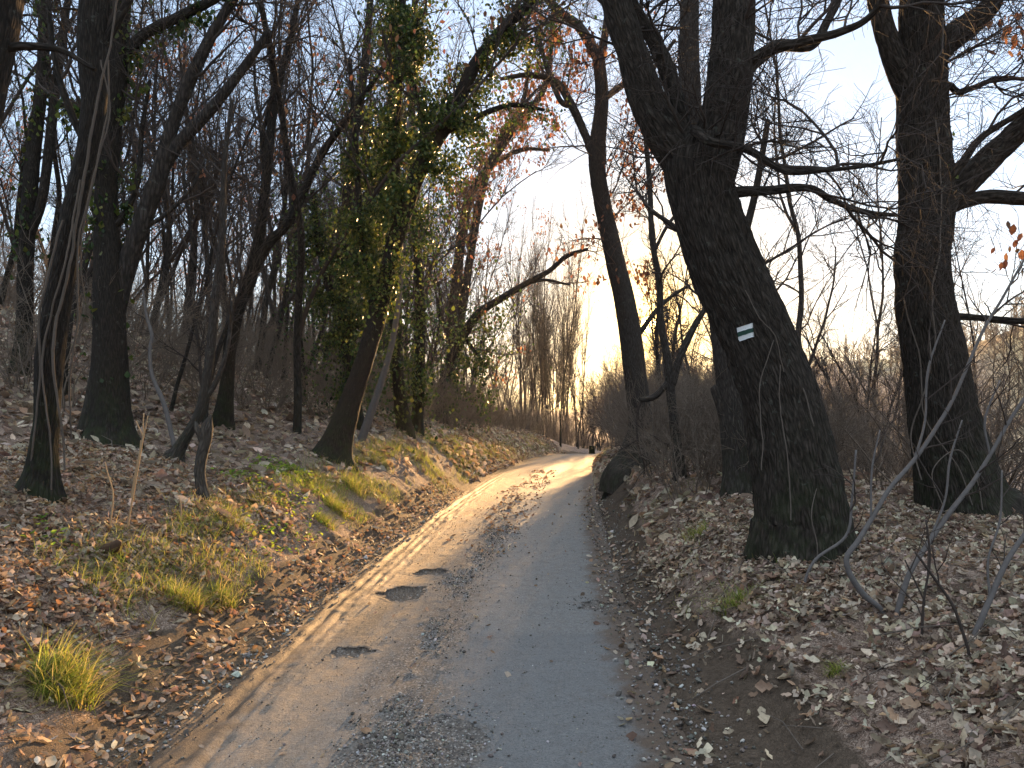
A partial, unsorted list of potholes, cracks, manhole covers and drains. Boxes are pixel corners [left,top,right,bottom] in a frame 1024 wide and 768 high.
pothole [370,585,430,603]
pothole [326,645,383,659]
pothole [408,567,451,576]
